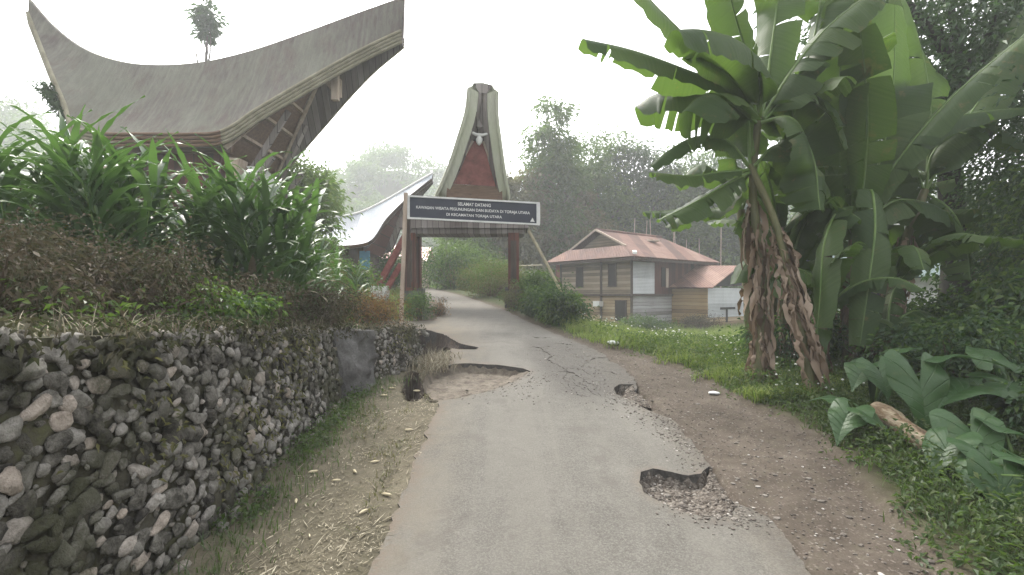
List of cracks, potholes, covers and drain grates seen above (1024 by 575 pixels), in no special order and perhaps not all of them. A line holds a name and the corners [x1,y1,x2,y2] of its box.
pothole [422,363,530,403]
pothole [419,330,479,359]
crack [534,337,618,402]
pothole [614,384,652,410]
pothole [639,466,736,517]
